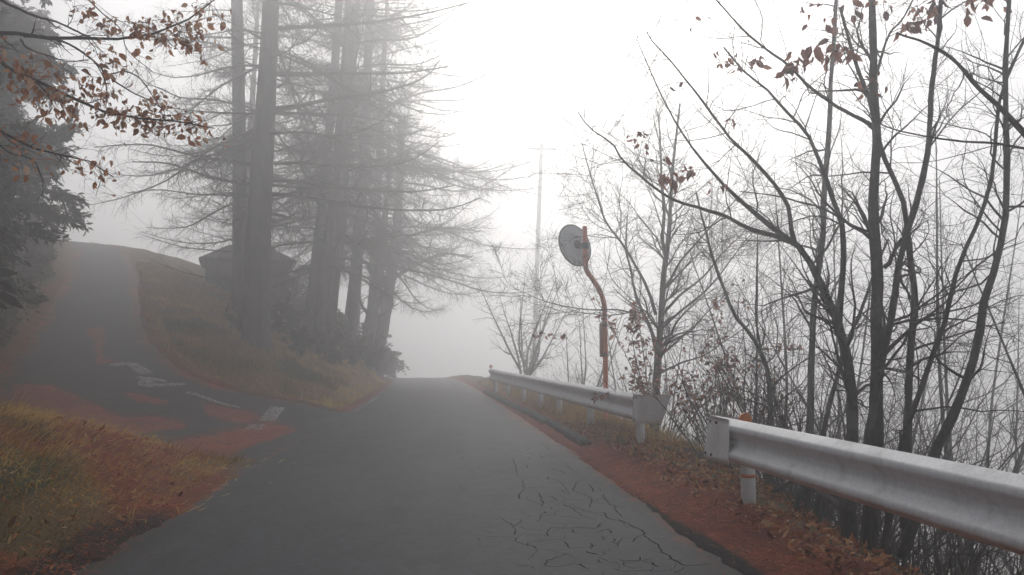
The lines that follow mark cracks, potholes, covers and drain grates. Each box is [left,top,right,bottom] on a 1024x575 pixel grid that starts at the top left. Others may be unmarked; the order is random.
crack [461,431,707,575]
